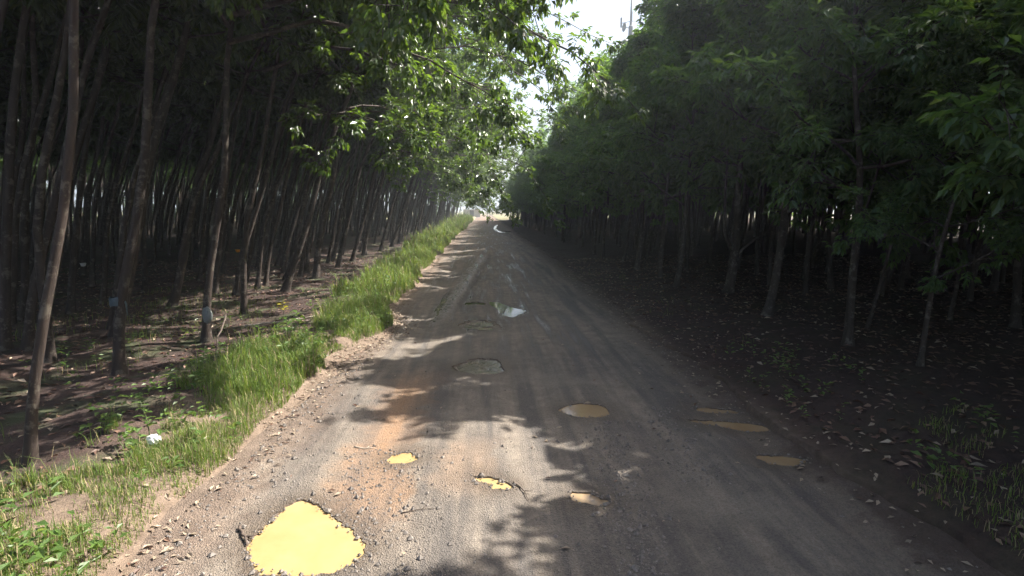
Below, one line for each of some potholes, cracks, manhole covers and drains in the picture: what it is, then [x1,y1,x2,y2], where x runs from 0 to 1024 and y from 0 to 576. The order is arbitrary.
pothole [387,452,418,464]
pothole [558,403,610,418]
pothole [685,419,769,432]
pothole [246,499,366,576]
pothole [457,320,502,331]
pothole [452,358,504,375]
pothole [473,476,513,490]
pothole [756,454,806,467]
pothole [488,301,526,317]
pothole [570,492,609,506]
